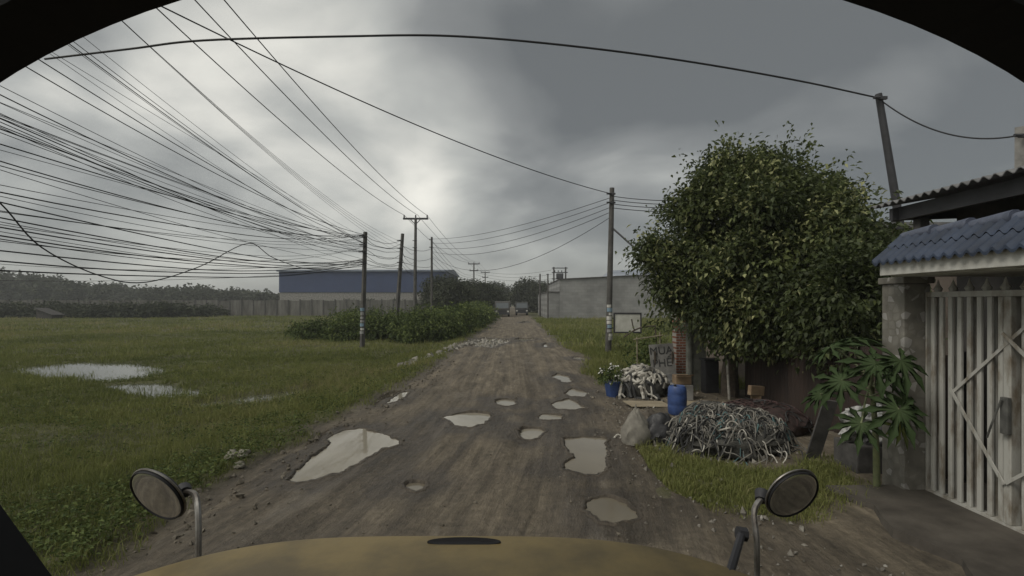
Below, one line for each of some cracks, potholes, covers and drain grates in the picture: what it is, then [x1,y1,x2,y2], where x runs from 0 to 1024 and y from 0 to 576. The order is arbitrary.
pothole [550,373,574,383]
pothole [563,387,590,397]
pothole [440,410,495,428]
pothole [579,494,644,526]
pothole [281,427,403,484]
pothole [560,436,612,476]
pothole [535,413,567,421]
pothole [384,390,412,404]
pothole [399,479,430,493]
pothole [515,425,549,441]
pothole [492,398,519,407]
pothole [548,398,589,410]
